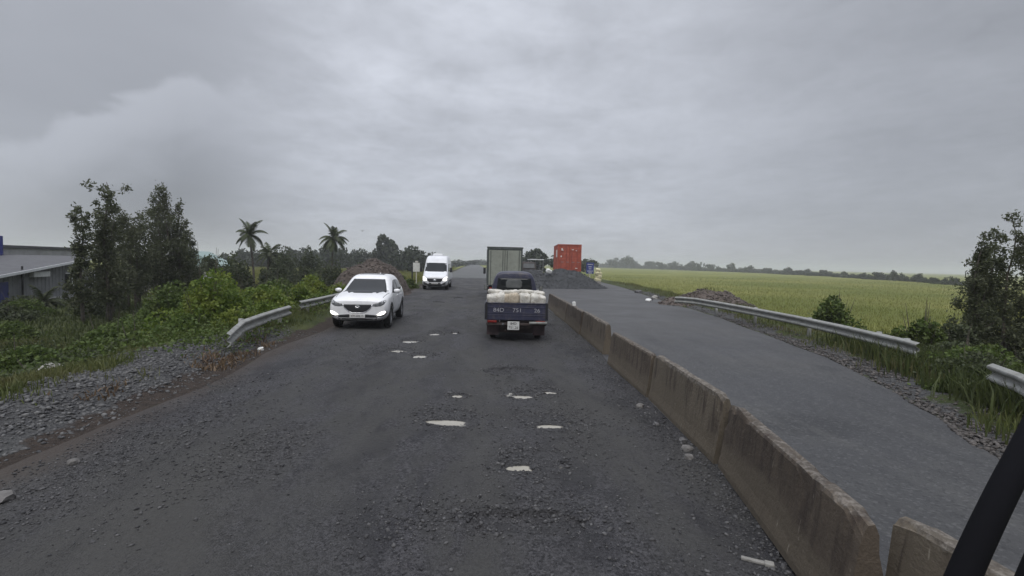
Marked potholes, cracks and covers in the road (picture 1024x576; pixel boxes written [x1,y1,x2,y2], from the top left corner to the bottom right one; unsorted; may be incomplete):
pothole [417,409,482,429]
pothole [482,366,540,375]
pothole [520,413,576,433]
pothole [505,391,536,399]
pothole [497,448,570,479]
